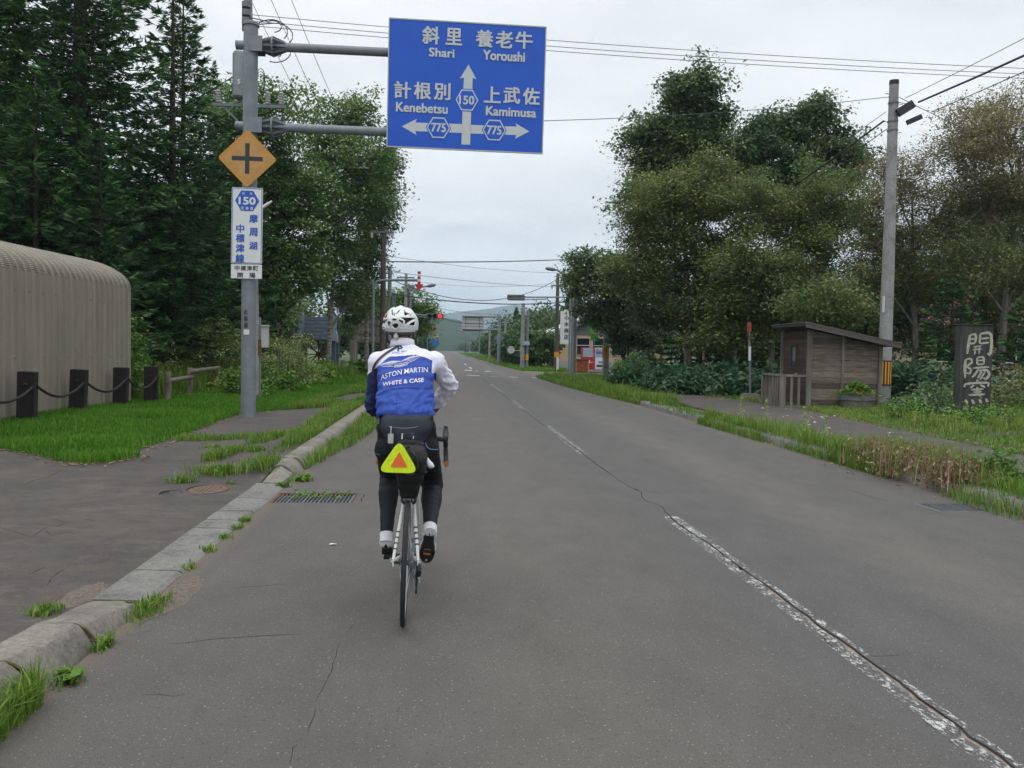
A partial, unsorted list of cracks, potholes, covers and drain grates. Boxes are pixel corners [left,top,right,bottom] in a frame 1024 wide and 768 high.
drain grate [270,493,358,503]
drain grate [916,503,985,511]
manhole cover [186,485,230,494]
crack [483,379,1015,768]
crack [290,624,354,762]
crack [174,634,290,644]
